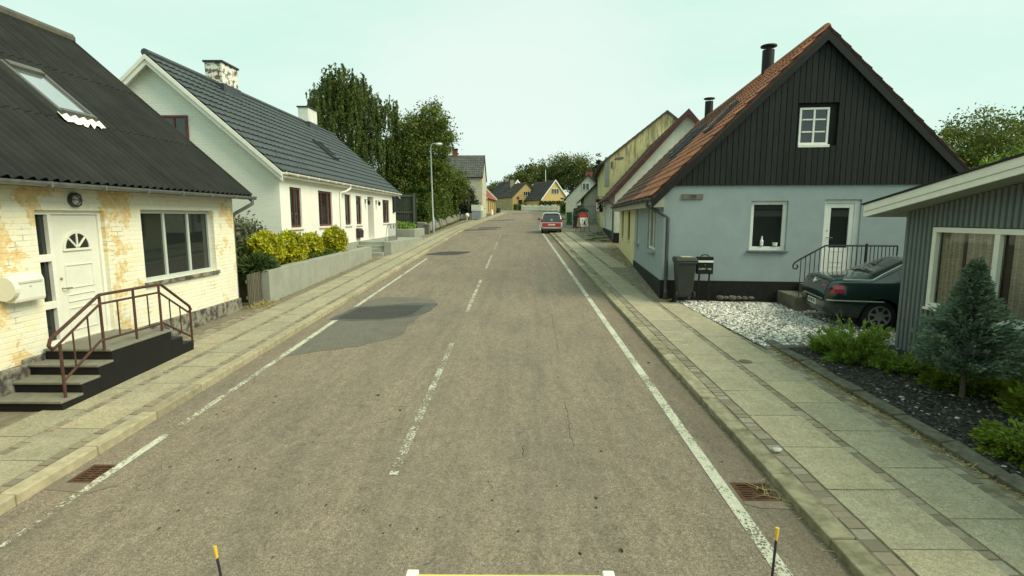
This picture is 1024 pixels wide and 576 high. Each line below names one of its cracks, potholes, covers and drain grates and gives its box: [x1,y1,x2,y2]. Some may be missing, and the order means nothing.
drain grate [66,464,116,483]
drain grate [730,483,782,501]
